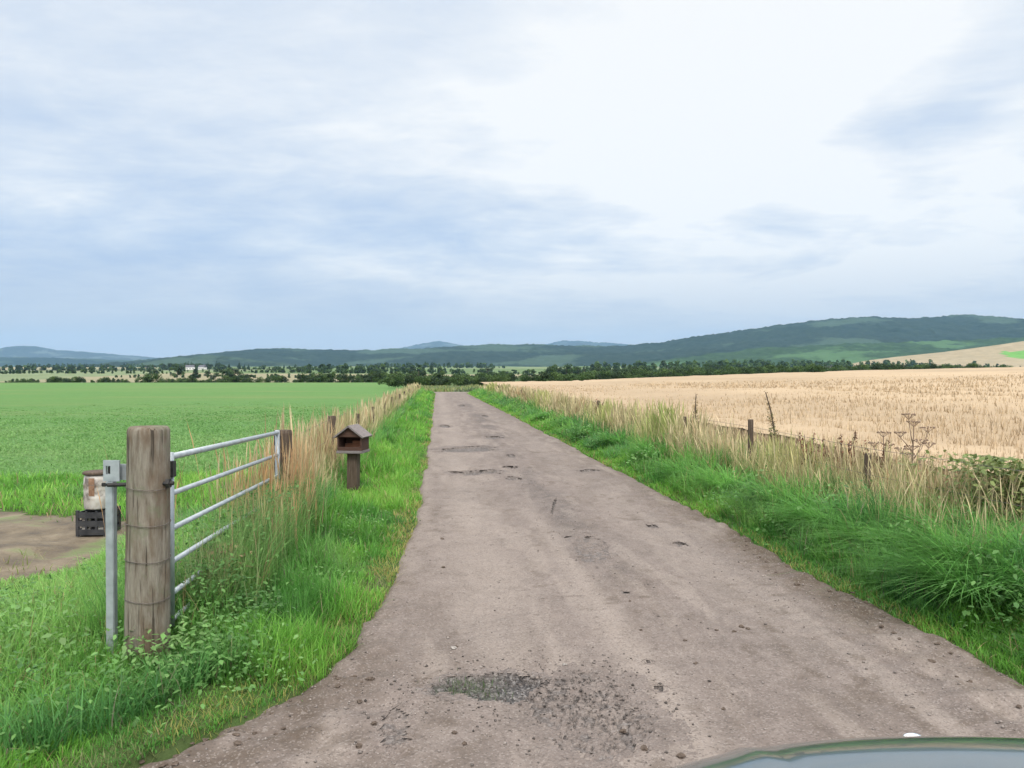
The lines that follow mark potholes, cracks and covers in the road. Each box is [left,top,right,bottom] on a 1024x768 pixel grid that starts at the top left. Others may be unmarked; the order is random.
pothole [426,445,504,454]
pothole [401,668,553,706]
pothole [443,468,510,476]
